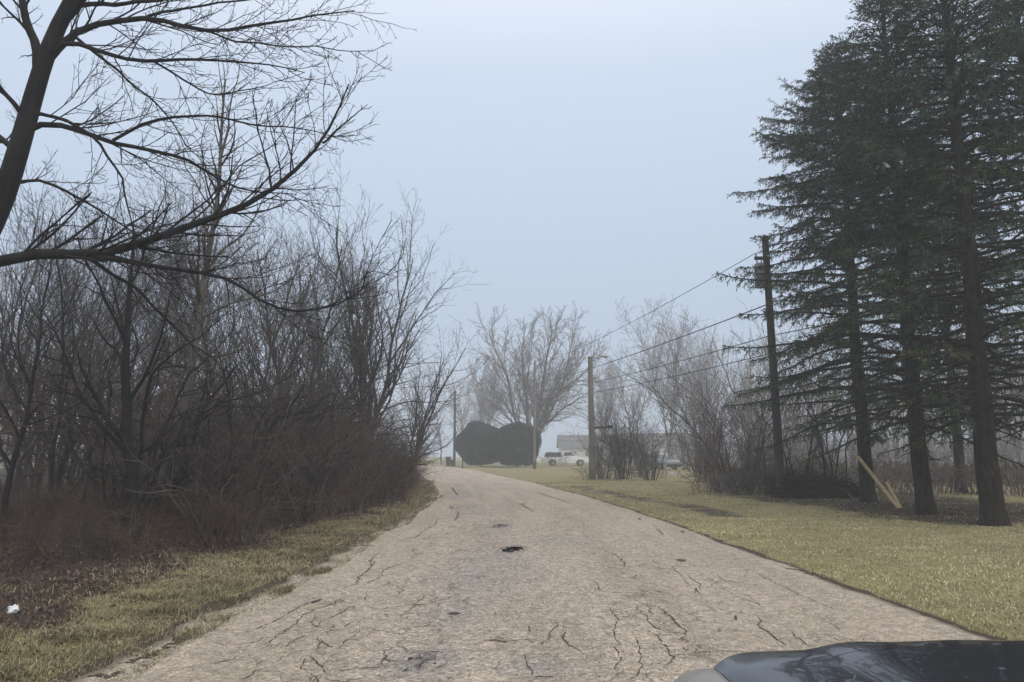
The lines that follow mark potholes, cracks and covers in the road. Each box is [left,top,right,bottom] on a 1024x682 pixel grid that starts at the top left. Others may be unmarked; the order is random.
crack [615,554,840,646]
crack [213,487,460,682]
pothole [496,545,528,554]
crack [492,603,690,679]
pothole [394,648,450,678]
